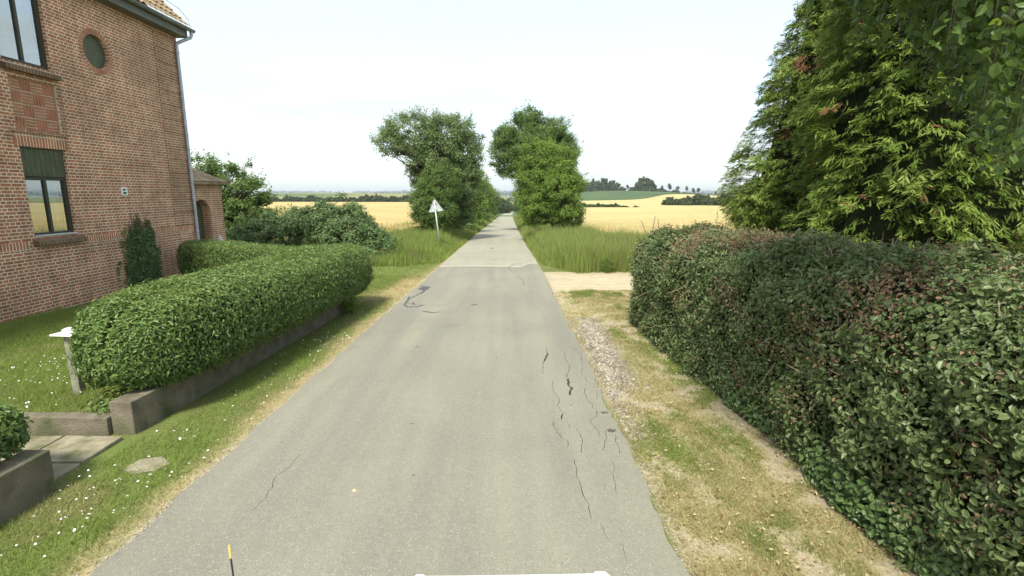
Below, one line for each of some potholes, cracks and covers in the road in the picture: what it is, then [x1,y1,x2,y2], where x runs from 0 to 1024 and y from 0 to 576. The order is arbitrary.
crack [553,365,620,489]
